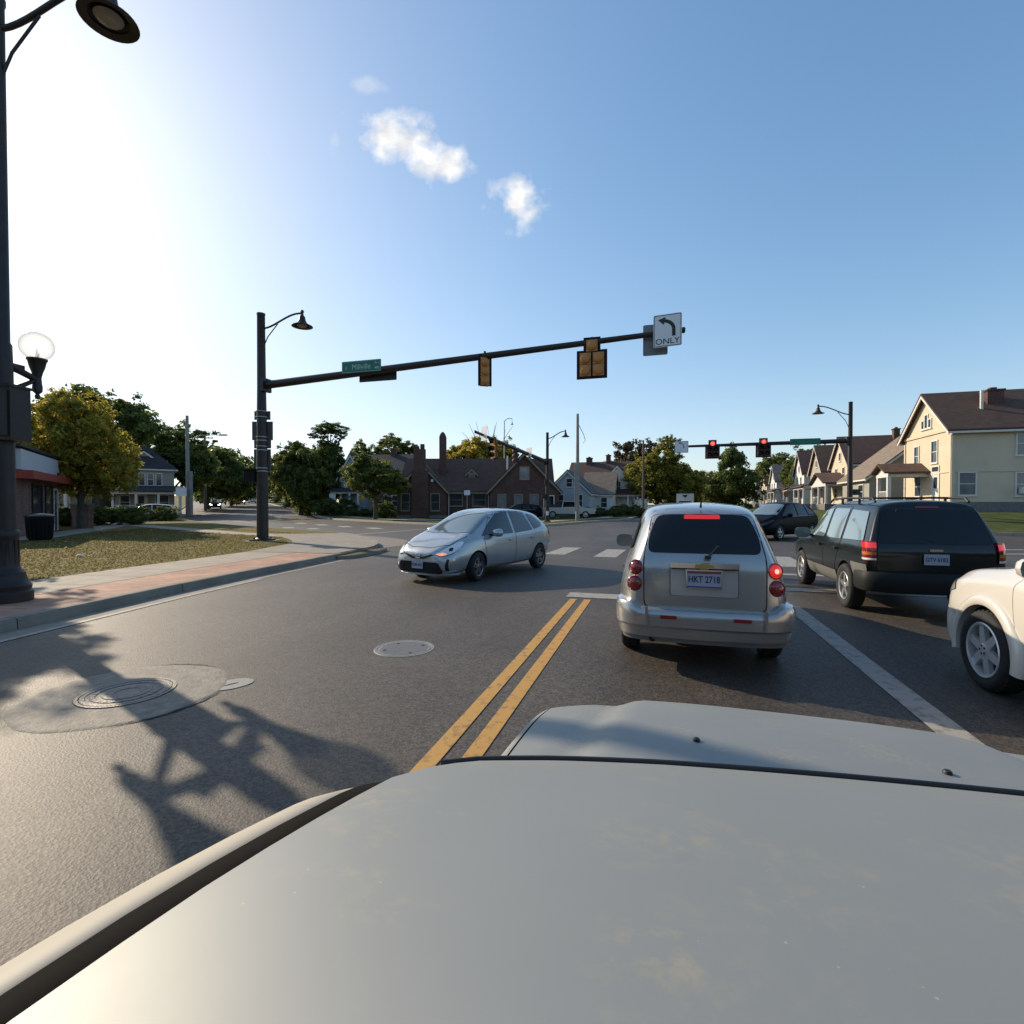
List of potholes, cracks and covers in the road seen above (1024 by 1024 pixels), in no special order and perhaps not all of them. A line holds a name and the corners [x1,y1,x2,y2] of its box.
manhole cover [374,640,435,657]
